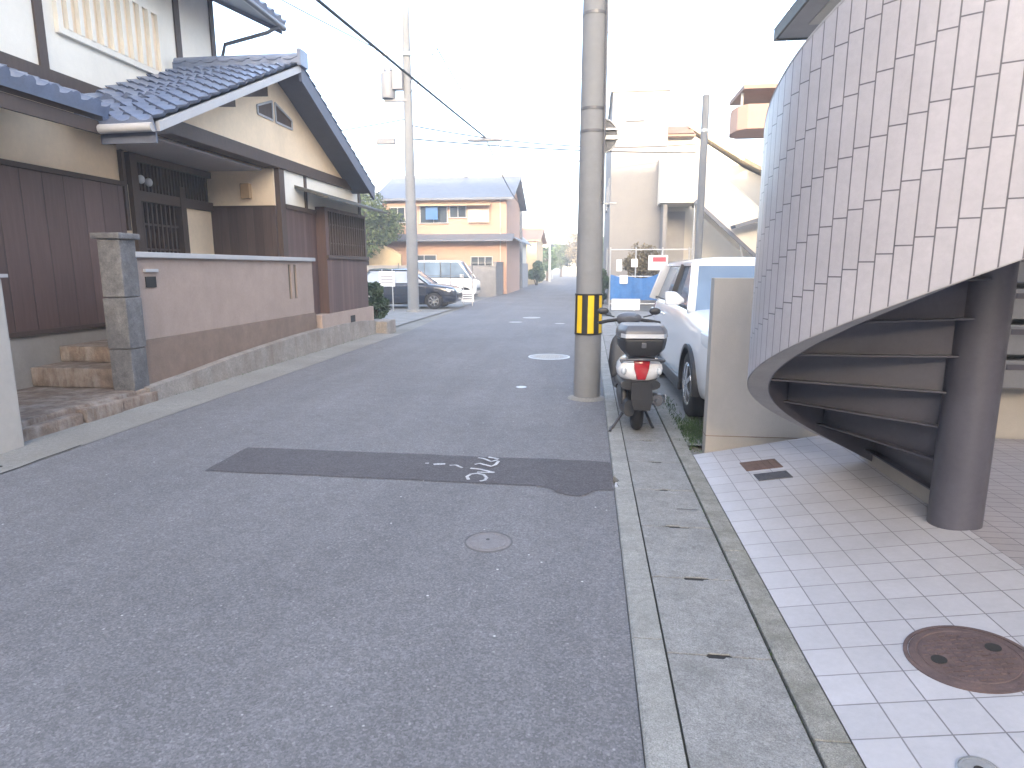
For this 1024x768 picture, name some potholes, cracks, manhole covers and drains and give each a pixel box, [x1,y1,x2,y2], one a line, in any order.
manhole cover [464,532,513,553]
manhole cover [903,625,1024,694]
